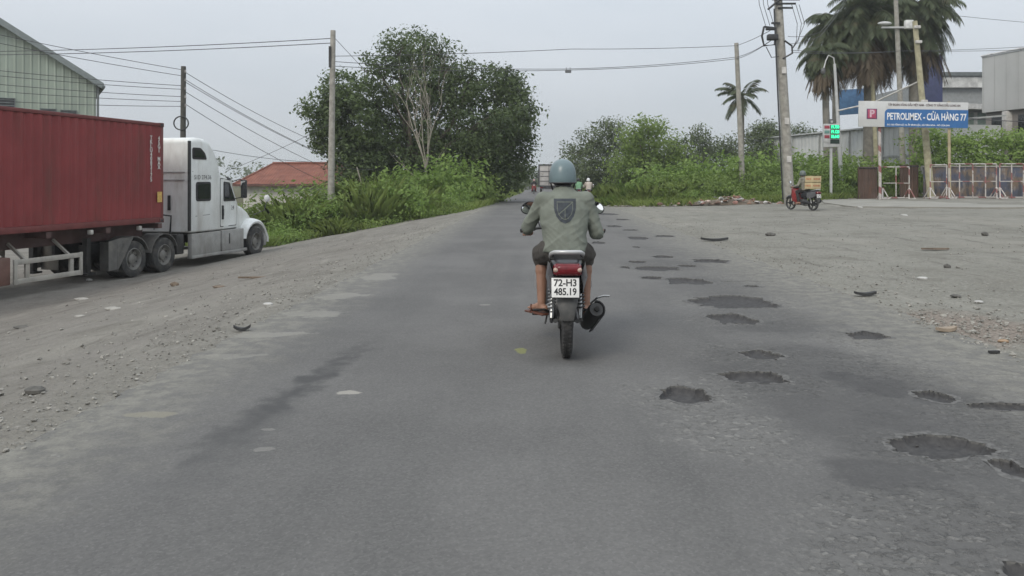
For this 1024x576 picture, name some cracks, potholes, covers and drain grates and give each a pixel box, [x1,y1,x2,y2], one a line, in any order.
pothole [700,313,764,325]
pothole [682,295,789,309]
pothole [964,401,1024,411]
pothole [731,349,790,361]
pothole [843,330,896,340]
pothole [907,389,963,405]
pothole [654,384,716,406]
pothole [665,277,717,285]
pothole [880,431,1008,462]
pothole [710,370,795,384]
